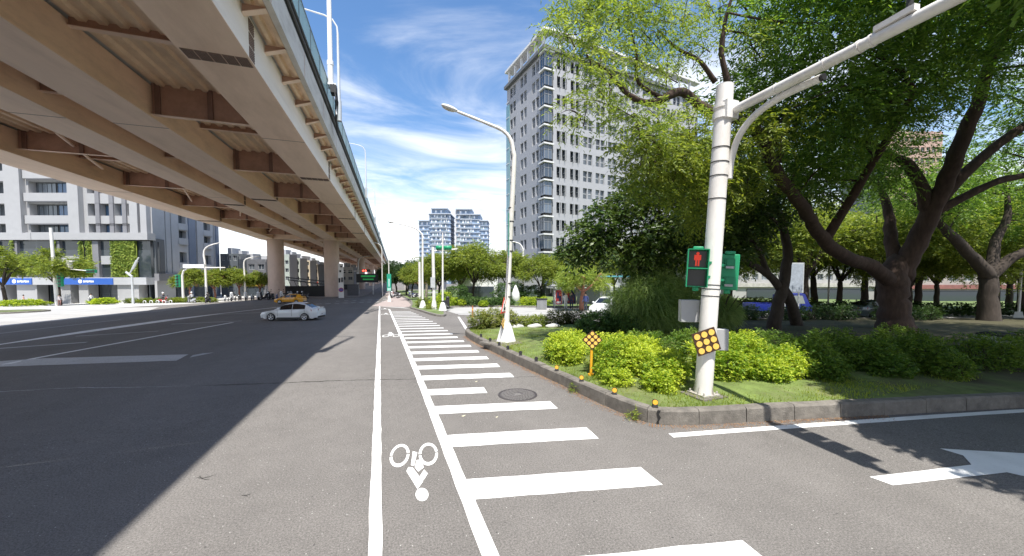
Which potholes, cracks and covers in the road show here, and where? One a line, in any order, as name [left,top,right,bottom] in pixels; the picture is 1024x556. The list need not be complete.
manhole cover [498,388,537,401]
